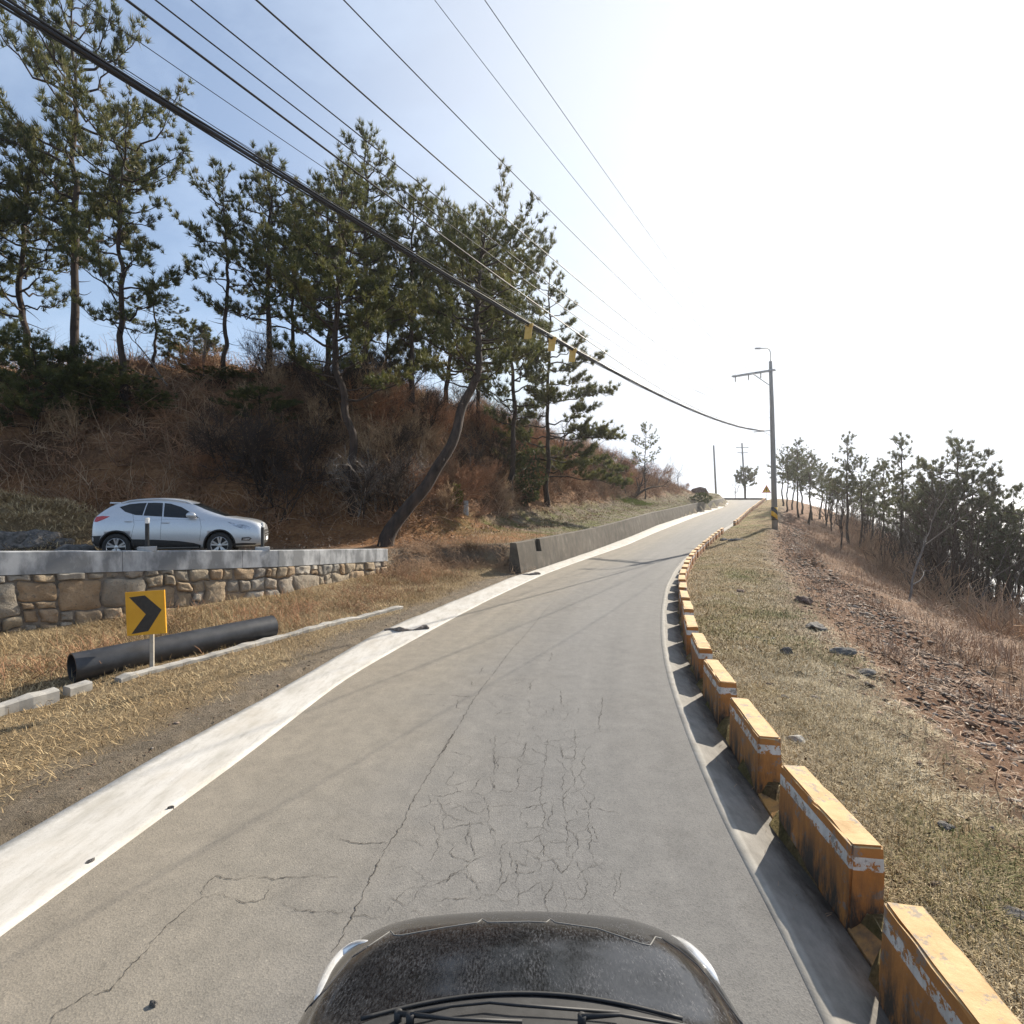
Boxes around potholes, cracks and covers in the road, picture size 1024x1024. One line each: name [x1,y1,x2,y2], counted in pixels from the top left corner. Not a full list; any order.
crack [283,679,632,917]
crack [51,875,338,1022]
